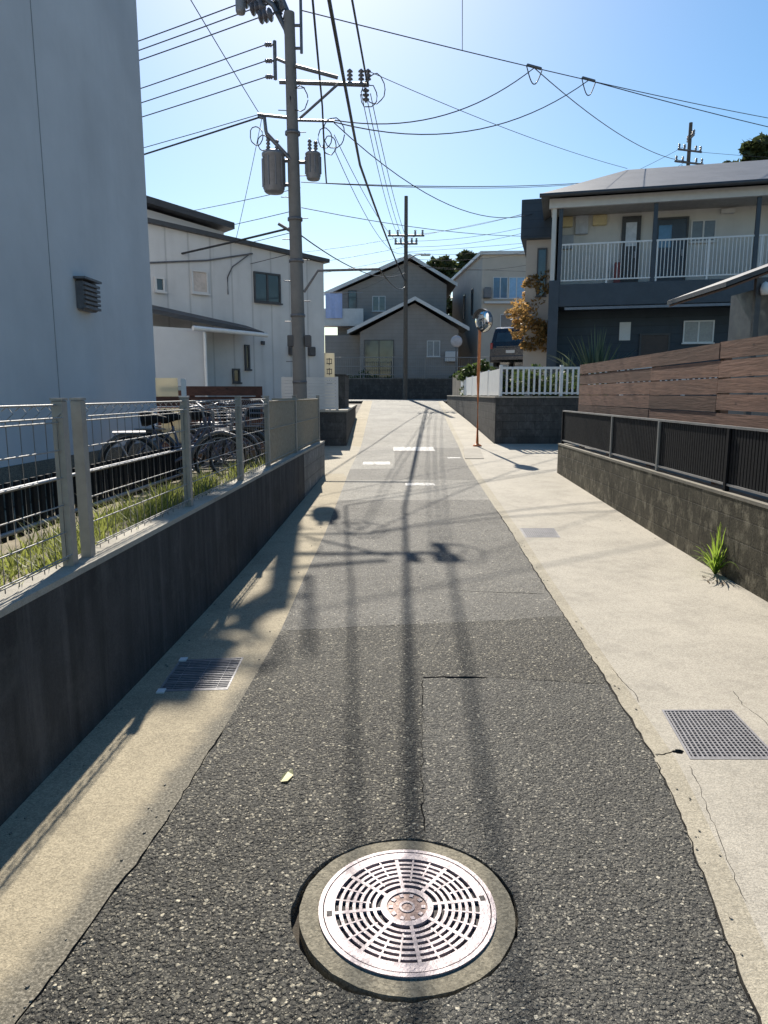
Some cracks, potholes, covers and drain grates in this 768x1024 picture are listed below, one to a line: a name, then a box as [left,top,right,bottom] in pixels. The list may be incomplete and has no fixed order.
drain grate [662,710,768,759]
drain grate [156,657,244,694]
drain grate [520,528,560,537]
crack [420,510,762,1024]
manhole cover [291,841,518,1003]
